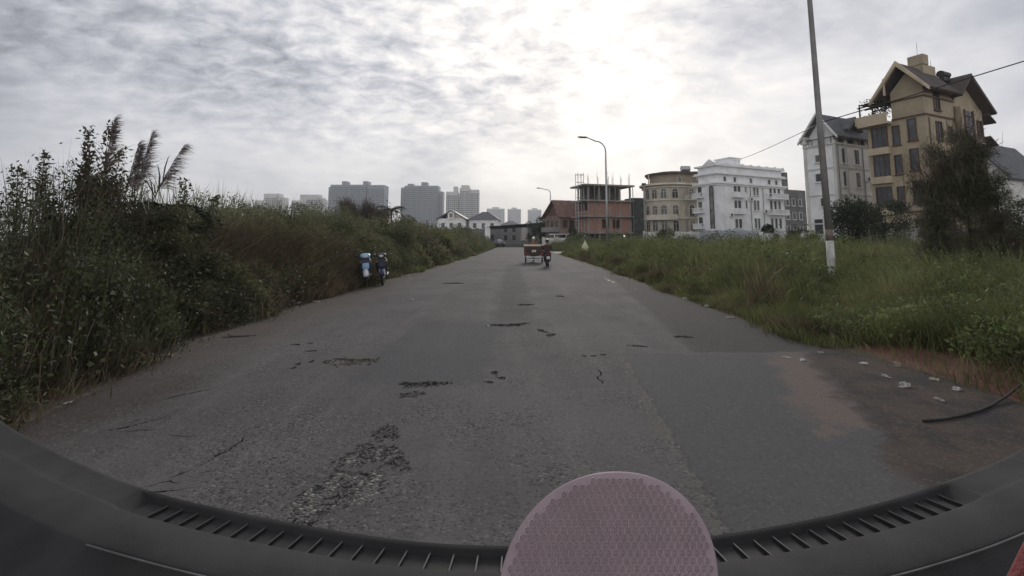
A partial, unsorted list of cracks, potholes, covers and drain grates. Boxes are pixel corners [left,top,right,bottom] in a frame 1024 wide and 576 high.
pothole [322,357,385,368]
pothole [399,380,453,388]
crack [103,389,209,437]
crack [146,437,244,492]
pothole [399,390,425,399]
pothole [284,423,412,526]
